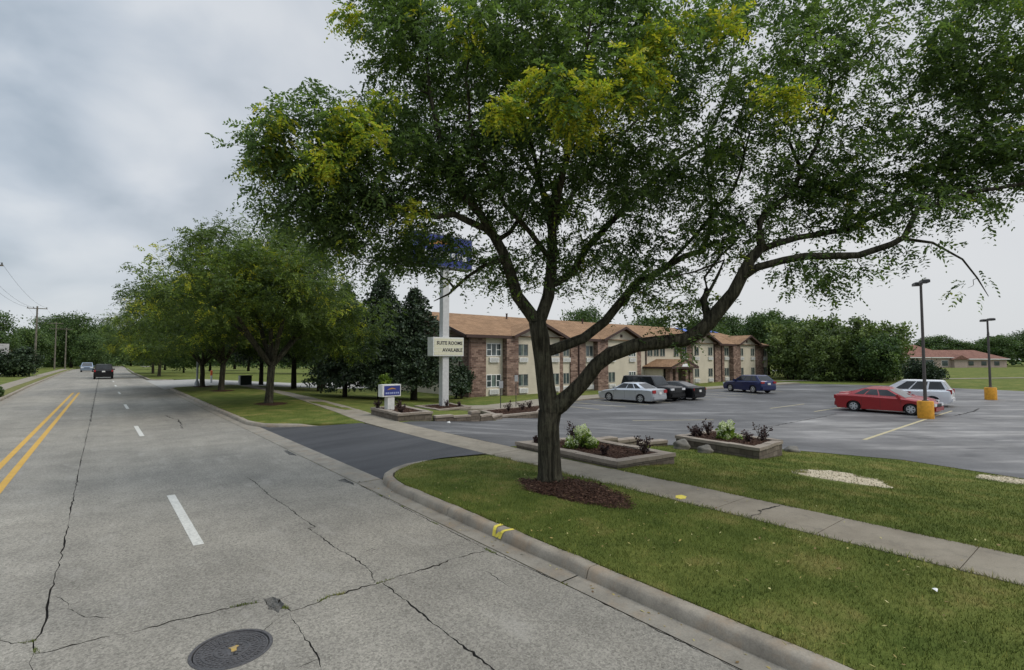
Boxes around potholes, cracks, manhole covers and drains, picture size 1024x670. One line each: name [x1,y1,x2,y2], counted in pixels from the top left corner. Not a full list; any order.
pothole [264,597,287,613]
manhole cover [187,629,273,670]
crack [0,383,508,670]
